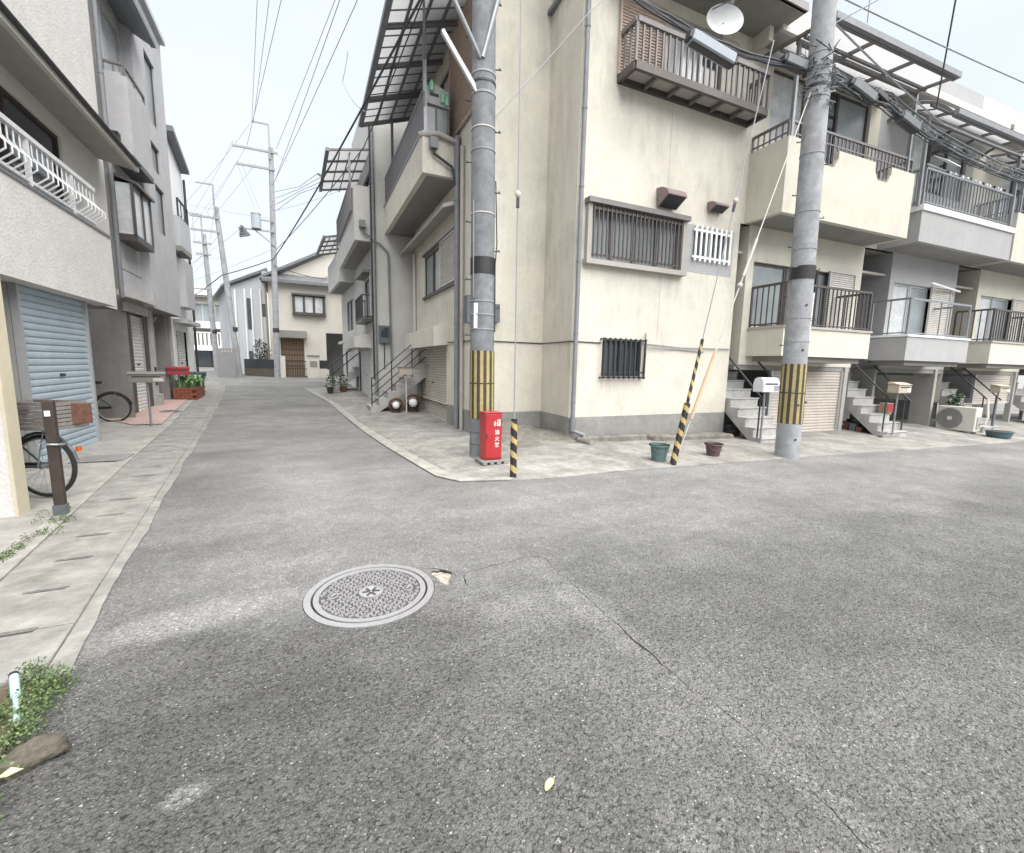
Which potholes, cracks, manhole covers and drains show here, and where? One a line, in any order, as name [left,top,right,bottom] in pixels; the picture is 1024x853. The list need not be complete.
crack [425,556,874,853]
manhole cover [303,564,434,628]
